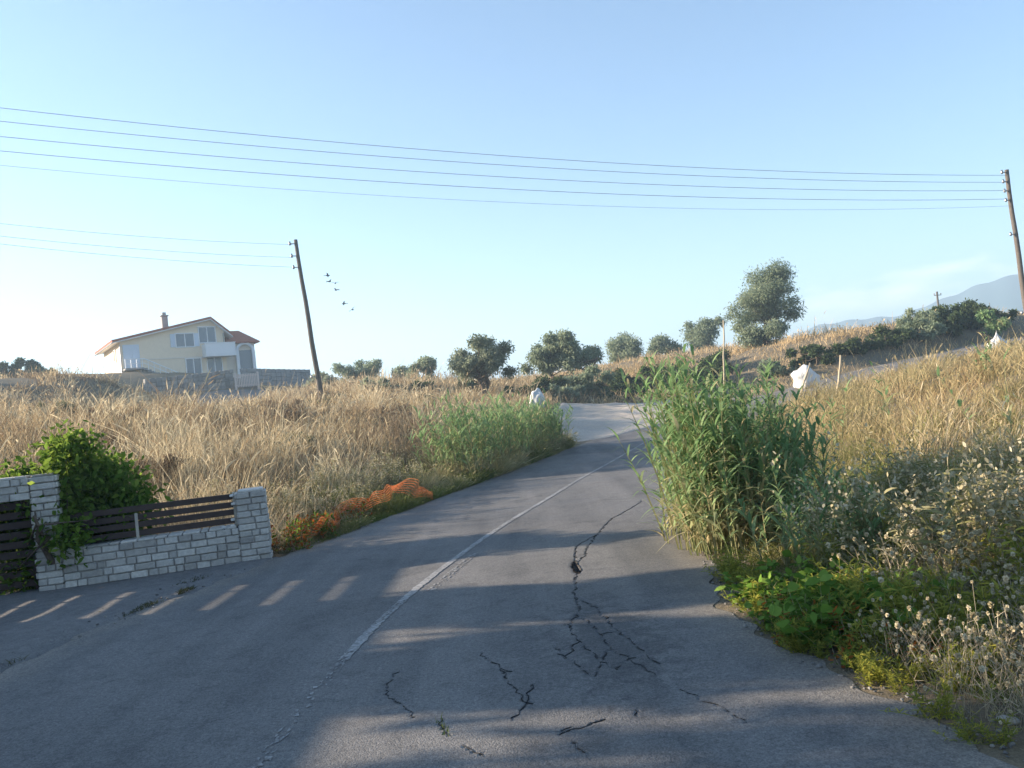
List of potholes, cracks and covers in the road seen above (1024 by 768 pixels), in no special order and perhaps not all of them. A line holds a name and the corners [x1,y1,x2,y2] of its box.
crack [480,655,534,719]
crack [555,501,660,676]
crack [559,719,606,760]
